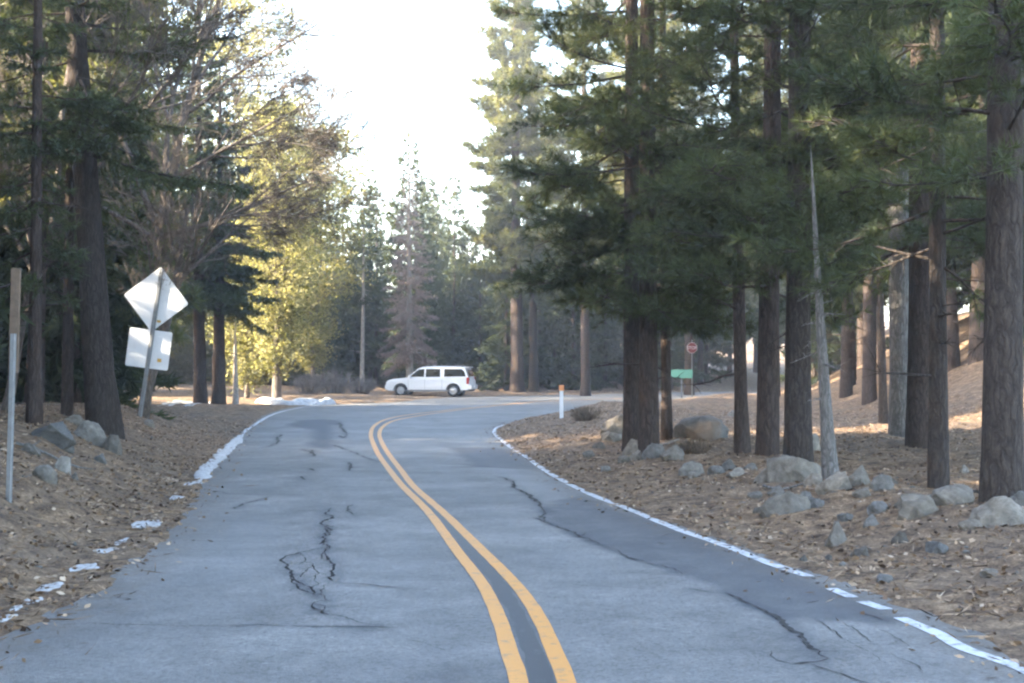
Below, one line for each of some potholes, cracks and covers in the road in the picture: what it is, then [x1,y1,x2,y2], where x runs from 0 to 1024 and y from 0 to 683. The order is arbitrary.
crack [465,464,682,573]
crack [244,434,316,480]
crack [37,491,467,650]
crack [334,422,376,471]
crack [725,592,923,683]
